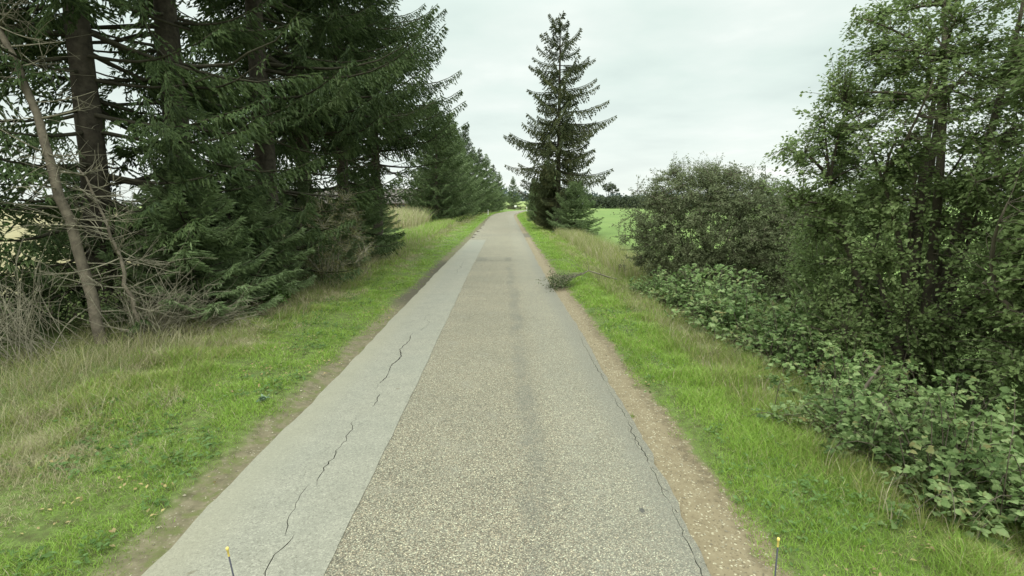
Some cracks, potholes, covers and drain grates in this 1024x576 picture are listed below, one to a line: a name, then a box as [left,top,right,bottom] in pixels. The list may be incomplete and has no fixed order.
crack [265,421,353,576]
crack [581,339,702,575]
